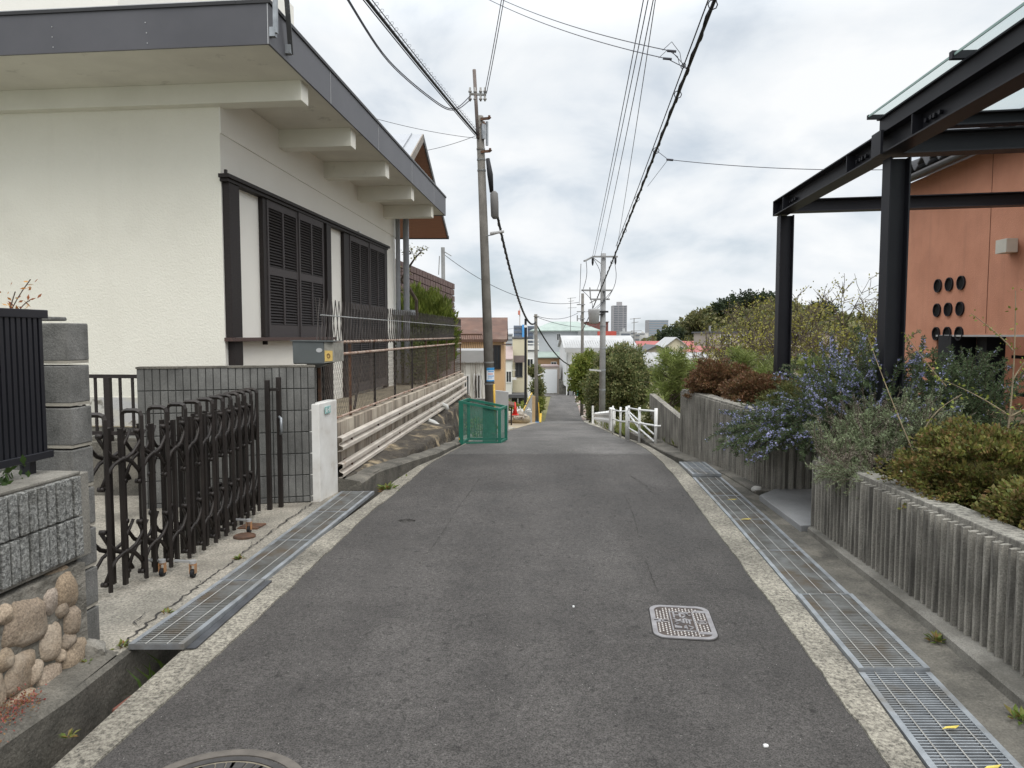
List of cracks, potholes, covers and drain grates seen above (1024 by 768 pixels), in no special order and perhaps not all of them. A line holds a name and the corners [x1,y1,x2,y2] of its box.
crack [118,502,313,649]
drain grate [315,491,374,514]
manhole cover [163,749,302,768]
drain grate [128,579,264,650]
drain grate [220,539,314,582]
manhole cover [648,605,719,641]
drain grate [276,511,349,542]
